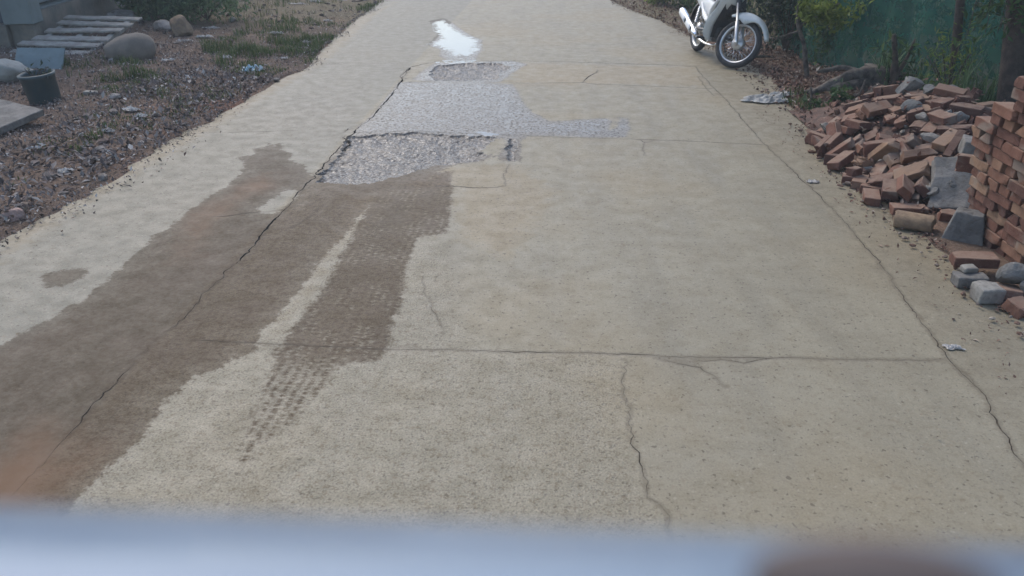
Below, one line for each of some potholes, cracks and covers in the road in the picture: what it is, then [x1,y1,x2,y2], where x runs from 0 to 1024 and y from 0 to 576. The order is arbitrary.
crack [20,61,1017,528]
